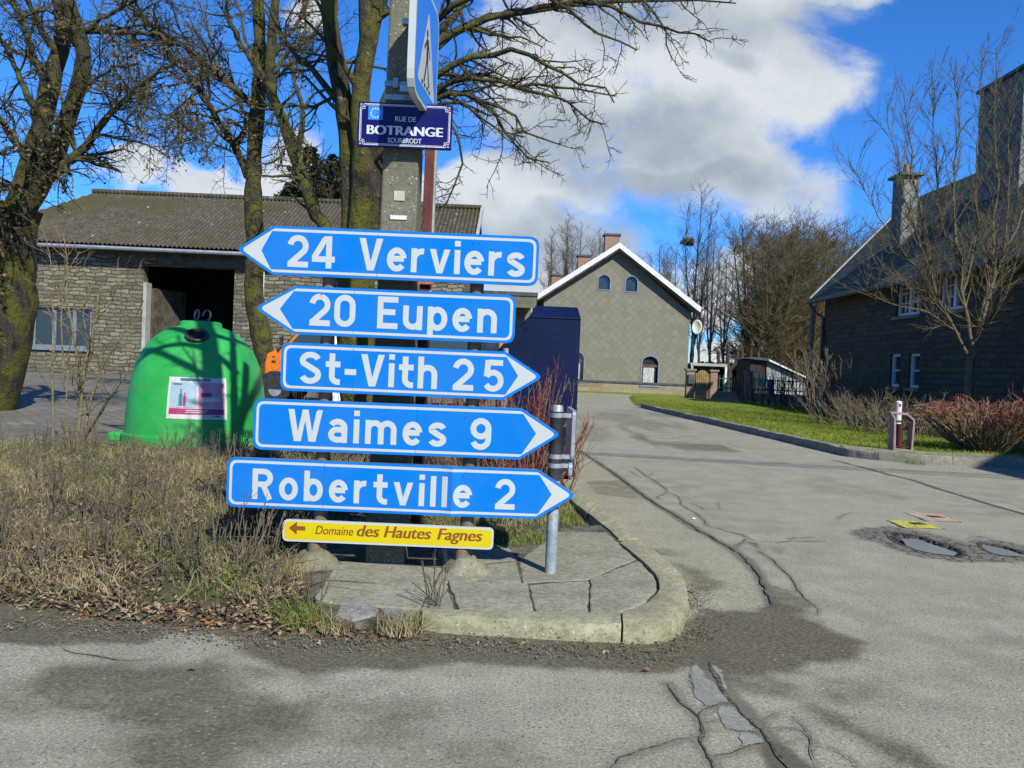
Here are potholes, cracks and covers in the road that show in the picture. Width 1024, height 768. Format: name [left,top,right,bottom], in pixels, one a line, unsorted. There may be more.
crack [581,451,819,610]
